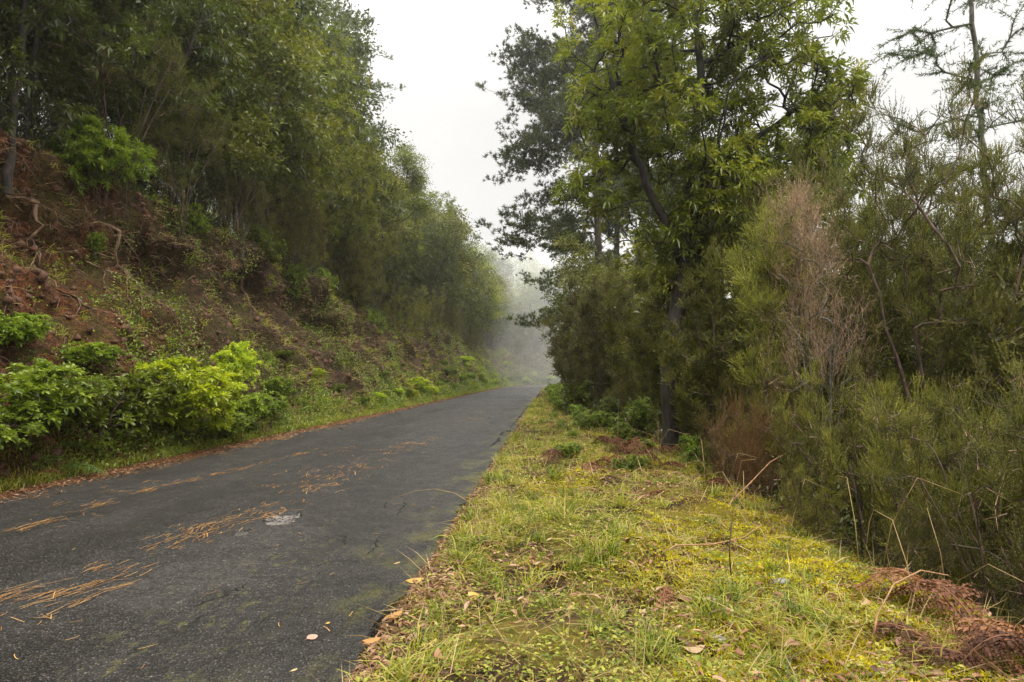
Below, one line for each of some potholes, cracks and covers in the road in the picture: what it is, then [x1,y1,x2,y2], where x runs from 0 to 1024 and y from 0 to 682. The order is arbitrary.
crack [184,584,246,630]
crack [490,400,534,447]
